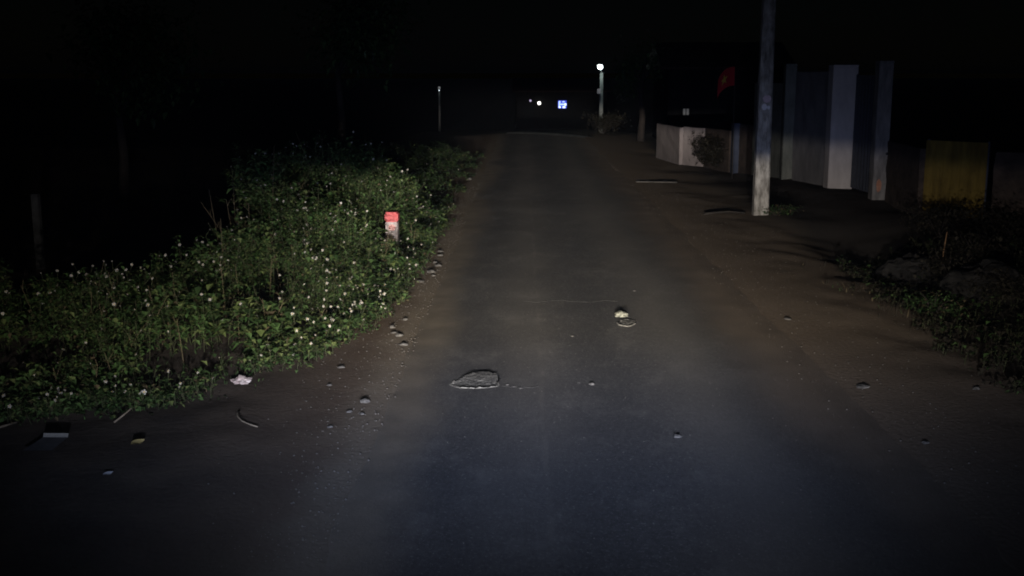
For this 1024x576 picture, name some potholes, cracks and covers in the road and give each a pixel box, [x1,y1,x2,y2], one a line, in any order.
pothole [617,319,637,327]
pothole [449,371,501,389]
